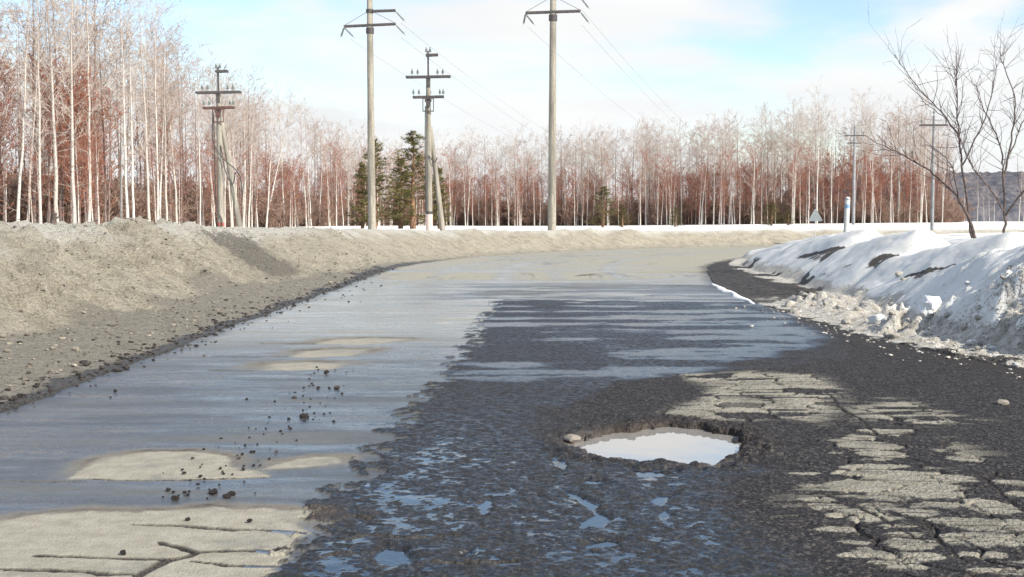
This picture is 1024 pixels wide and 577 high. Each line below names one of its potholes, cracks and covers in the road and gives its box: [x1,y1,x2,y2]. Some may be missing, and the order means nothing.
crack [0,509,530,577]
crack [738,389,893,444]
crack [844,469,1024,565]
pothole [535,414,786,473]
crack [658,405,673,418]
